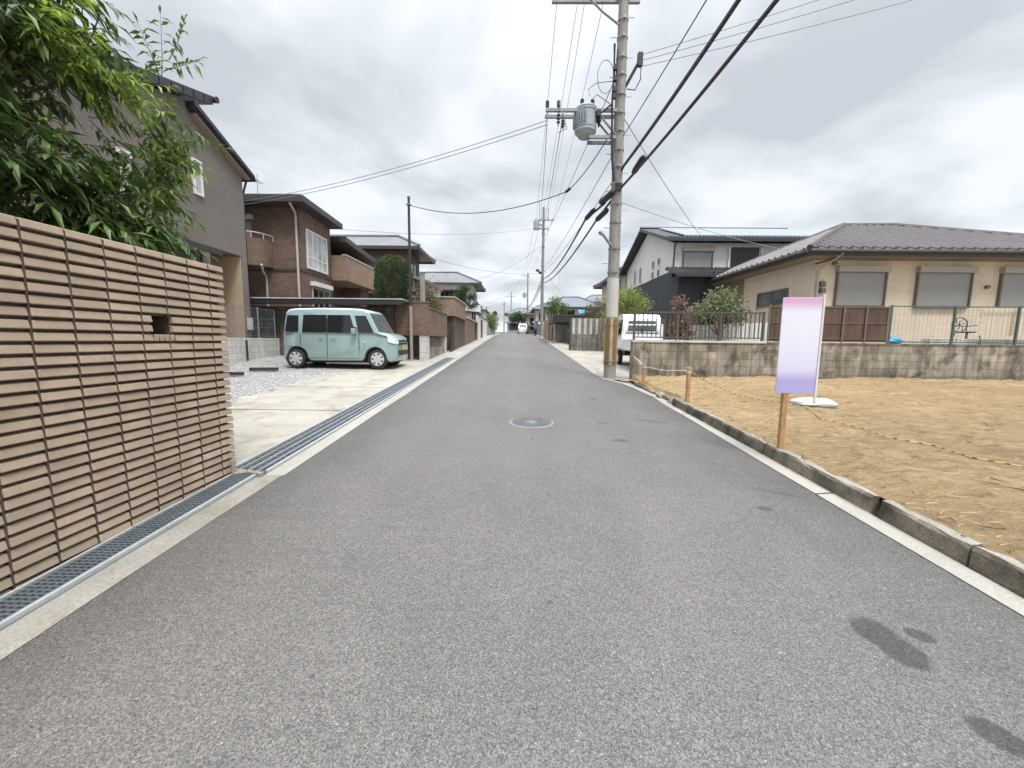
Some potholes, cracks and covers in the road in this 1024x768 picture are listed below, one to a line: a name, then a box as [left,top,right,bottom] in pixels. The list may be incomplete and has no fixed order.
drain grate [286,419,352,442]
drain grate [354,394,394,407]
drain grate [132,474,256,531]
manhole cover [510,417,554,428]
drain grate [0,527,167,631]
drain grate [236,440,319,474]
drain grate [374,386,408,396]
drain grate [326,405,376,421]
